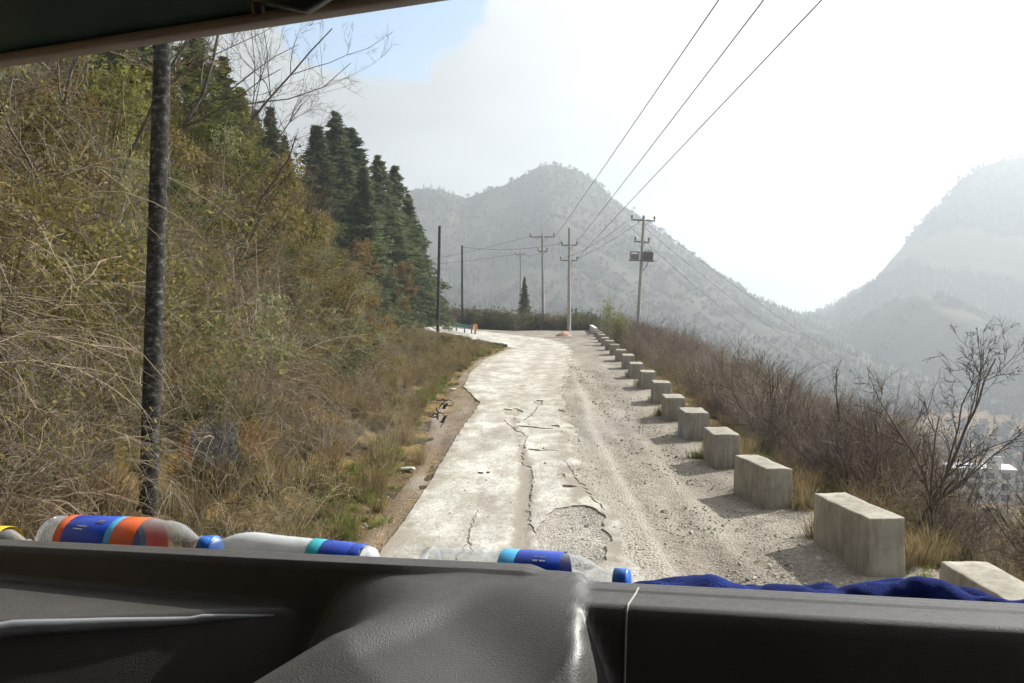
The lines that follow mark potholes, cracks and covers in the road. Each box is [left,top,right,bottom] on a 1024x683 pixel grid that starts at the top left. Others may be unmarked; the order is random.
crack [504,406,553,550]
crack [564,461,604,509]
crack [455,510,478,561]
pothole [536,505,613,570]
